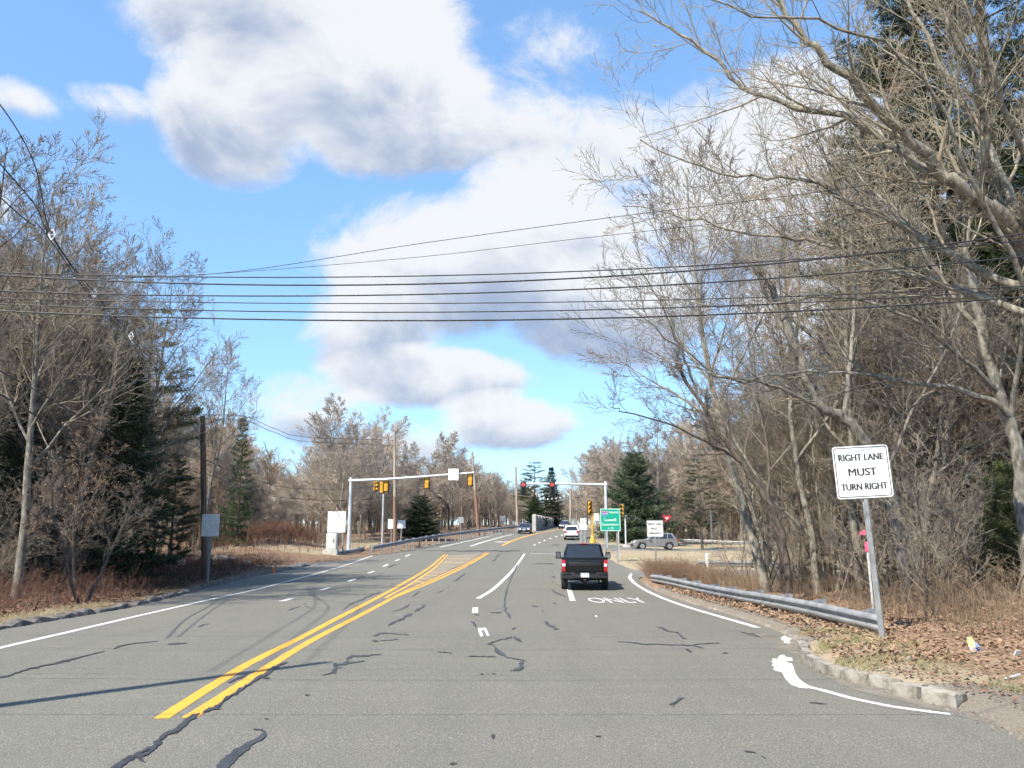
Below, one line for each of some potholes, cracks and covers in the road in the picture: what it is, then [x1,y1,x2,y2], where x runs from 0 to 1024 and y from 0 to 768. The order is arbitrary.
crack [618,627,759,653]
